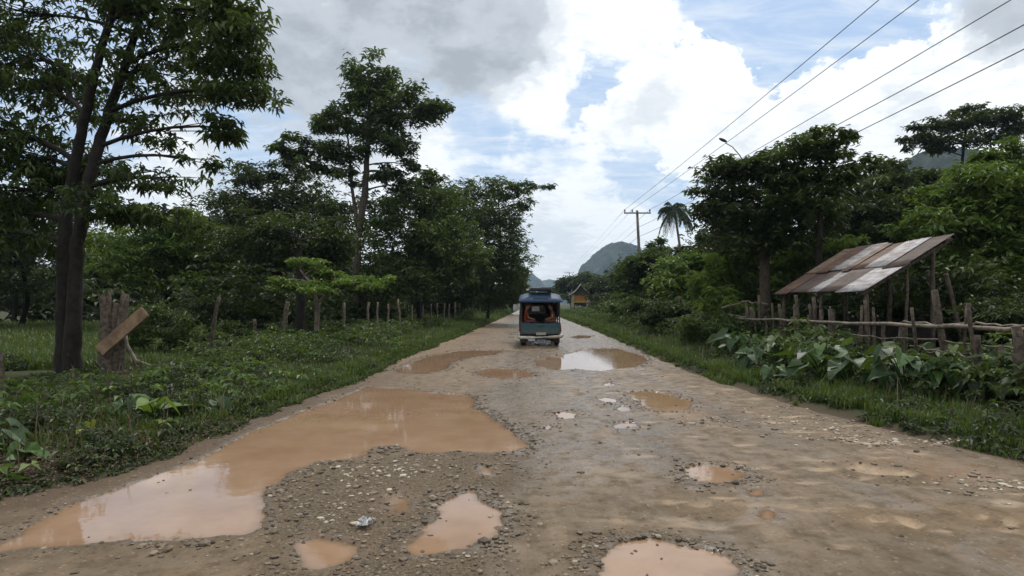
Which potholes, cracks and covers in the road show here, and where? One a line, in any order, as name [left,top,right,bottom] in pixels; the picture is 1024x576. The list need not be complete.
pothole [614,389,713,414]
pothole [525,347,663,371]
pothole [0,385,552,566]
pothole [386,349,511,374]
pothole [467,367,545,381]
pothole [538,409,598,421]
pothole [605,418,651,432]
pothole [540,527,790,576]
